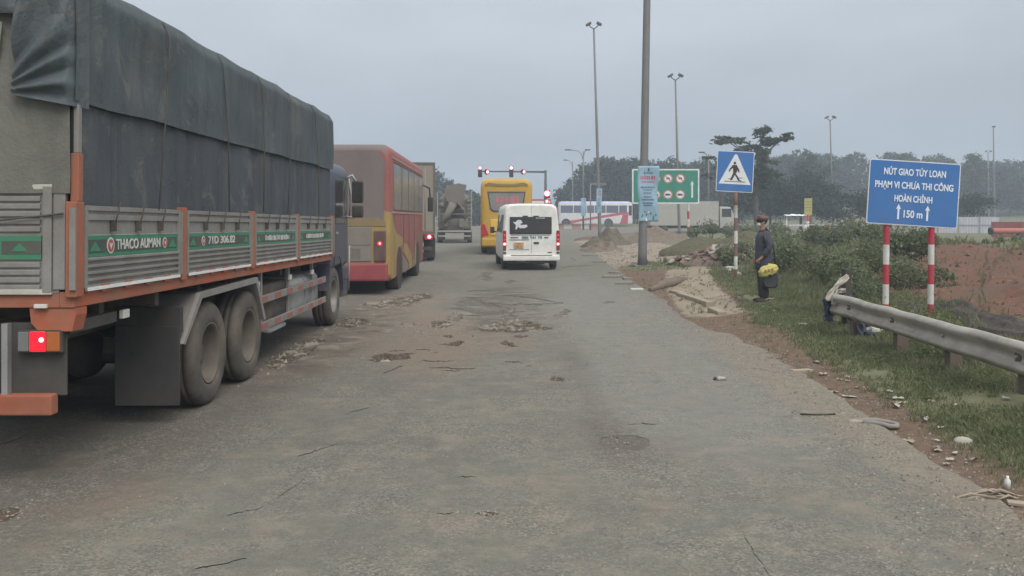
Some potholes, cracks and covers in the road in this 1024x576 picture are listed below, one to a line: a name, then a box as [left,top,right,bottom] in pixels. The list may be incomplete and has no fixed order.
pothole [369,353,414,362]
pothole [335,318,369,329]
pothole [473,319,553,333]
pothole [0,508,20,522]
pothole [359,293,434,308]
pothole [263,338,327,369]
crack [384,349,473,374]
